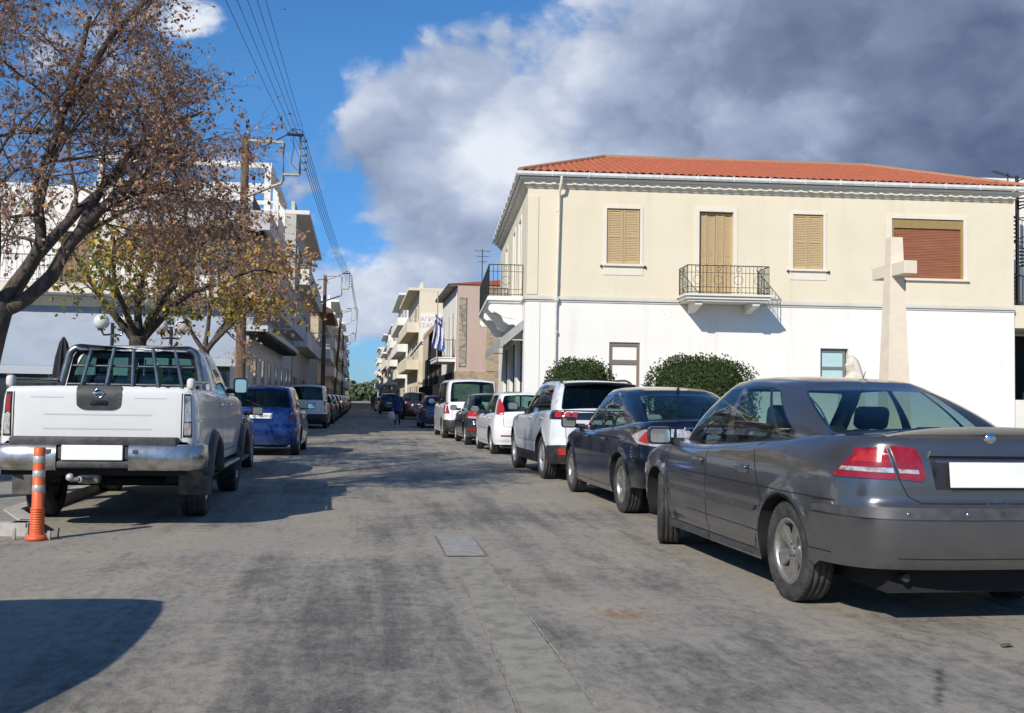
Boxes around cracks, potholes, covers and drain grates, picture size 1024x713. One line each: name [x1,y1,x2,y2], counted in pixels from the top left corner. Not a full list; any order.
manhole cover [434,536,489,557]
